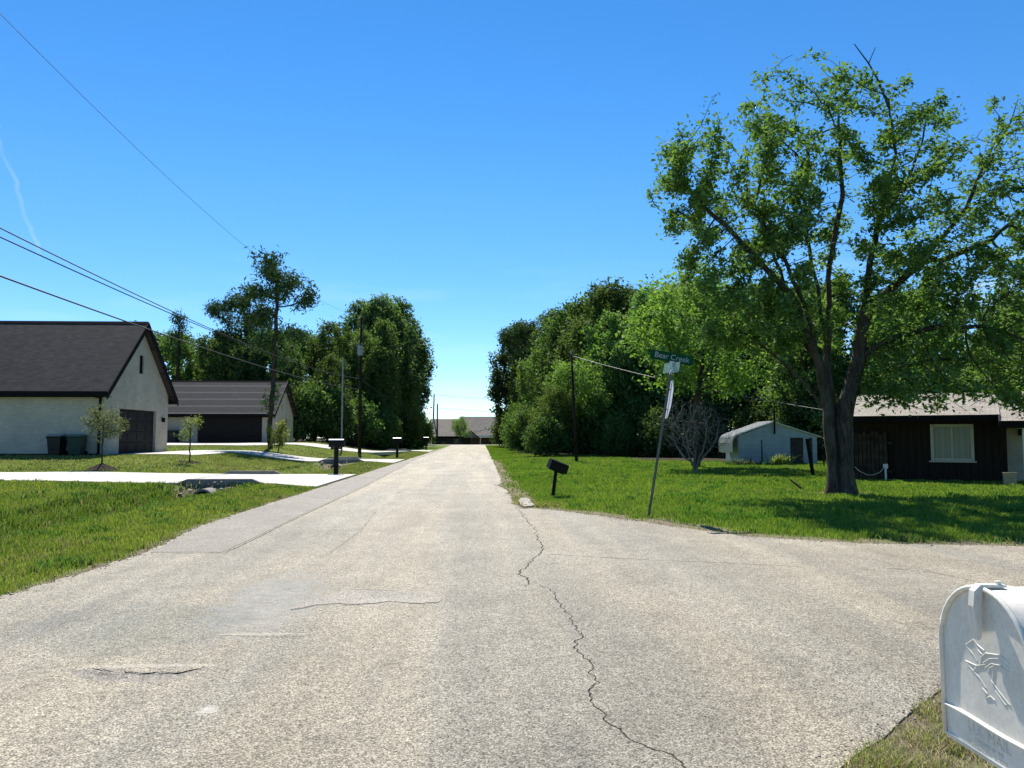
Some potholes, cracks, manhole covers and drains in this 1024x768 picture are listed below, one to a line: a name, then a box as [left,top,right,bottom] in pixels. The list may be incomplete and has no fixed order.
crack [518,511,798,768]
pothole [72,667,209,683]
